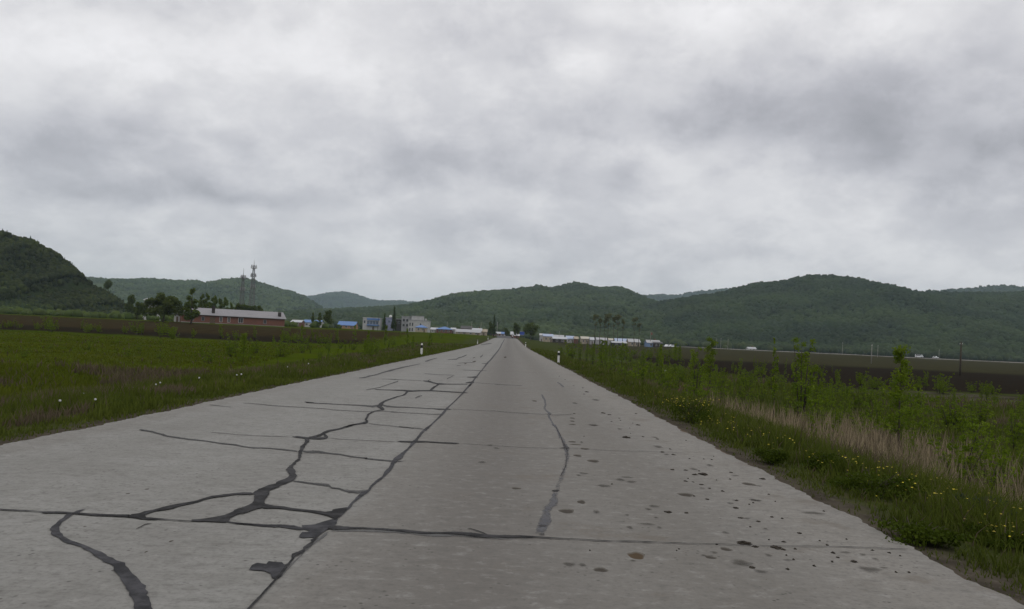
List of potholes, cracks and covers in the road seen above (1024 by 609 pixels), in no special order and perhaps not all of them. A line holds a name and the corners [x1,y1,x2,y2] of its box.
crack [250,355,466,429]
